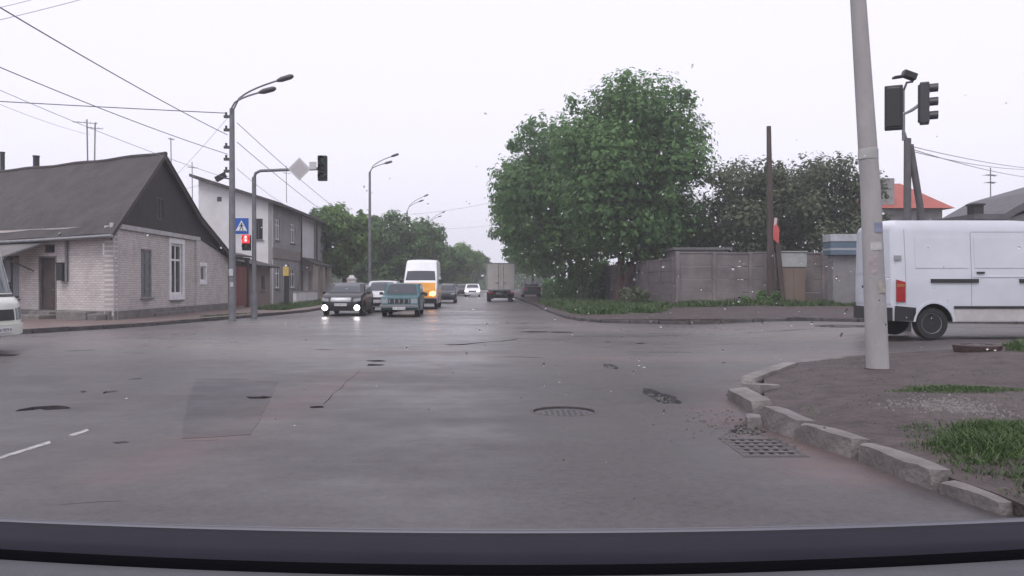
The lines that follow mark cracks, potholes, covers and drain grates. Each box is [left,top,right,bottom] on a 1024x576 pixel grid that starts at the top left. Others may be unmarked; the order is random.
pothole [642,388,682,404]
crack [447,339,543,358]
manhole cover [952,343,1003,352]
manhole cover [530,406,598,416]
drain grate [720,438,809,457]
